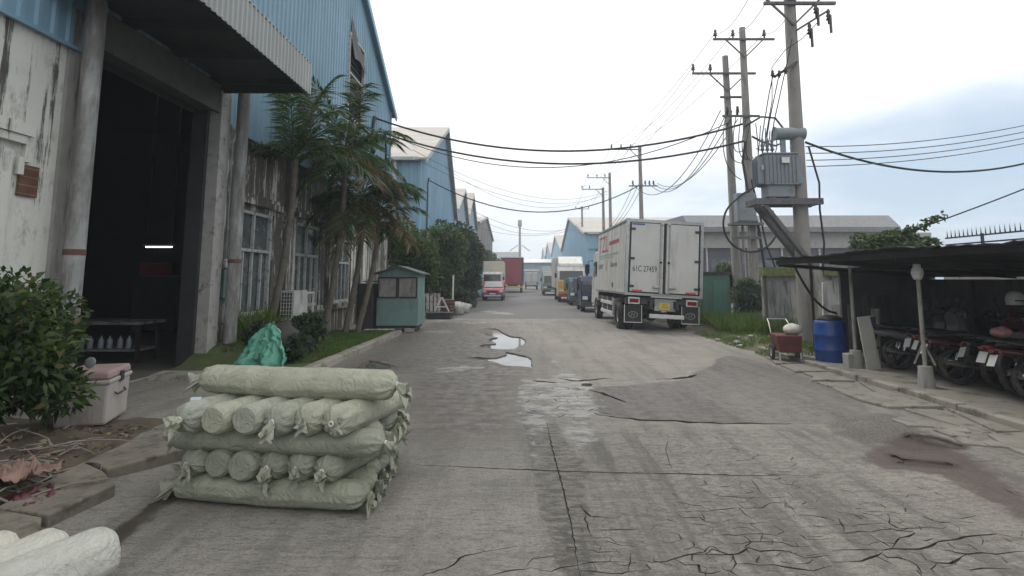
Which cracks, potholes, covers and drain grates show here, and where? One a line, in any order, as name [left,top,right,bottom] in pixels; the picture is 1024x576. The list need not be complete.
crack [833,482,1023,576]
pothole [477,328,527,346]
crack [422,378,834,576]
